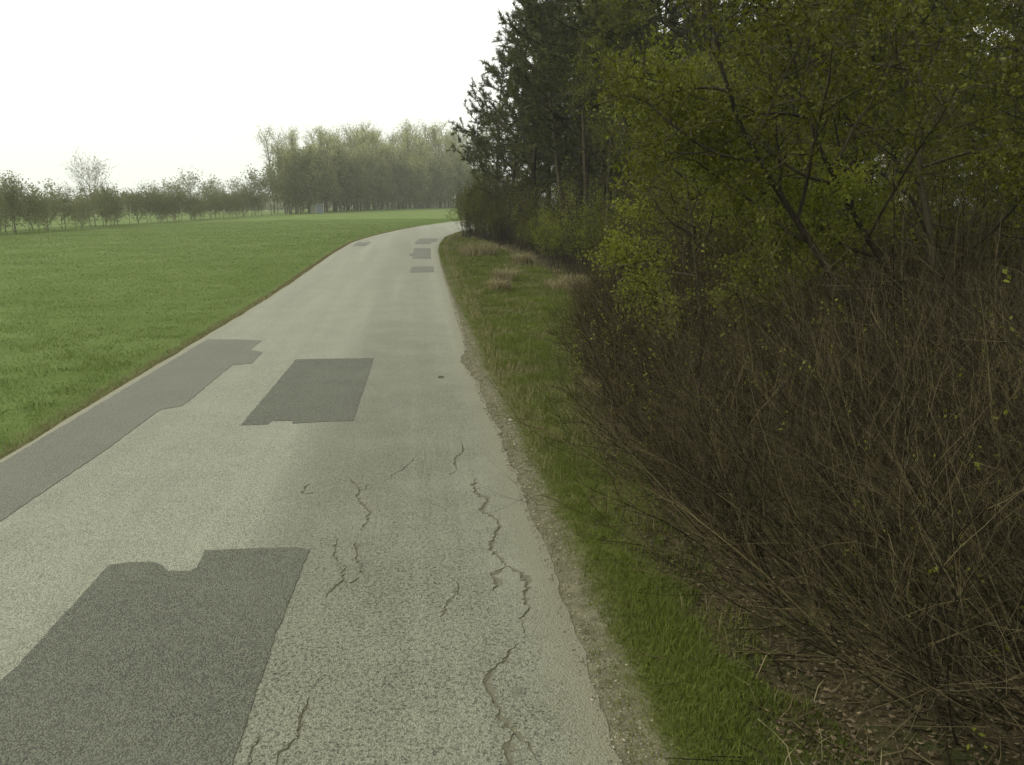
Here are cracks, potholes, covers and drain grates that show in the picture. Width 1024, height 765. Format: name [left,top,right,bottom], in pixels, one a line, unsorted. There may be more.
crack [248,698,310,765]
crack [301,477,372,597]
crack [440,582,460,617]
crack [450,440,538,765]
